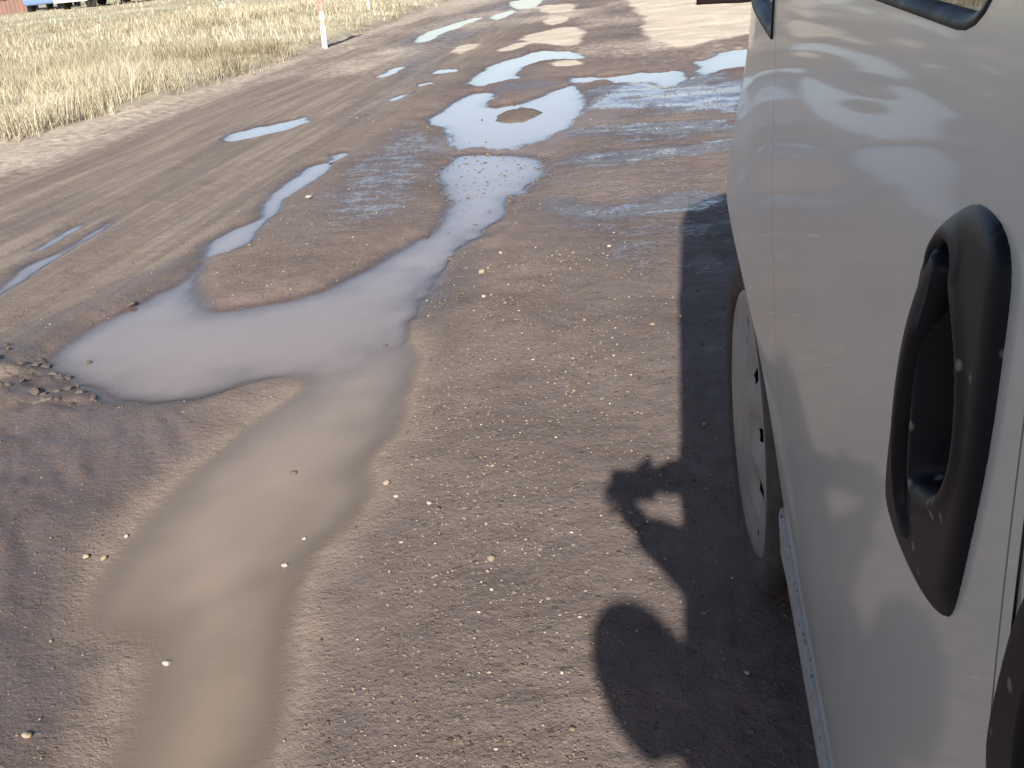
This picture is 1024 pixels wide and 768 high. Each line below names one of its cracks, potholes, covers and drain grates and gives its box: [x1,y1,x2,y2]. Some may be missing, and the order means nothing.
pothole [0,218,123,302]
pothole [30,149,557,768]
pothole [423,82,596,151]
